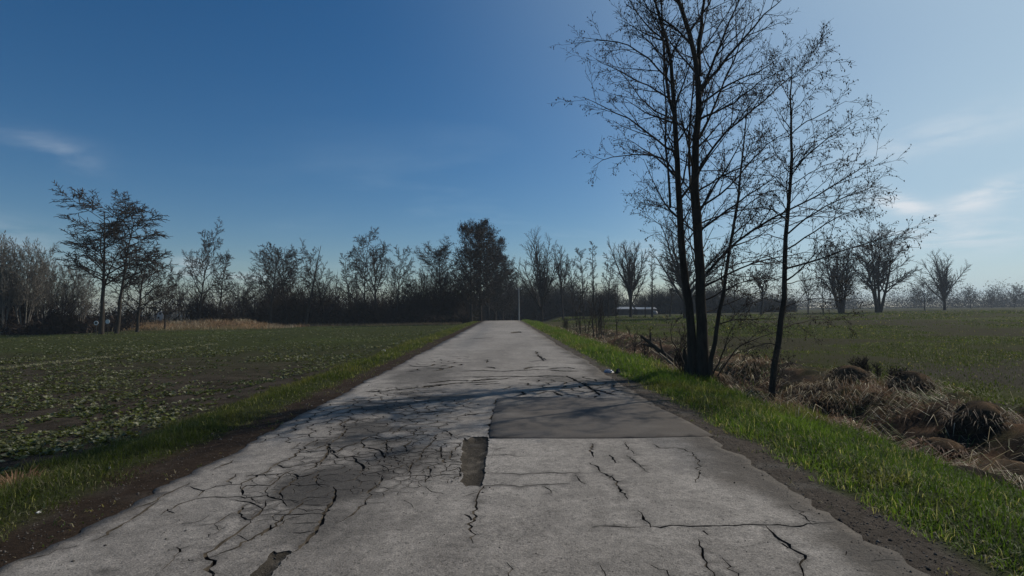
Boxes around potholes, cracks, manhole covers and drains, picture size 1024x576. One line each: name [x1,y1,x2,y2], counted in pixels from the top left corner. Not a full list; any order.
pothole [460,436,489,487]
pothole [250,550,292,576]
crack [94,351,897,576]
